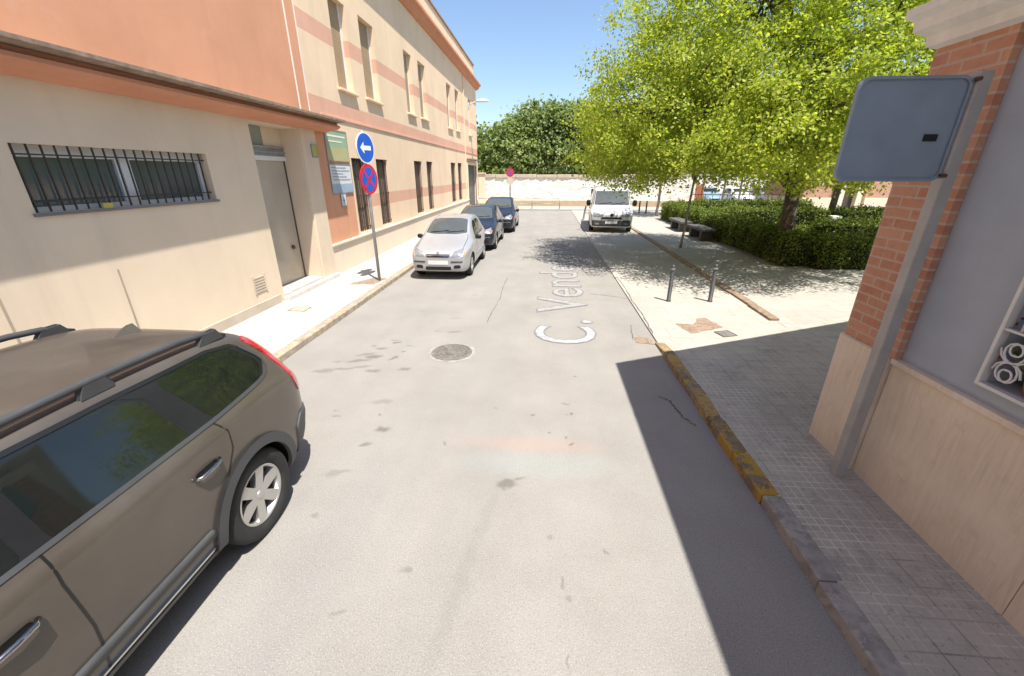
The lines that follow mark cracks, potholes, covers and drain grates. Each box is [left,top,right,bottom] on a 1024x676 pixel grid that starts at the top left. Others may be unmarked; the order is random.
manhole cover [427,343,476,362]
crack [659,396,696,426]
